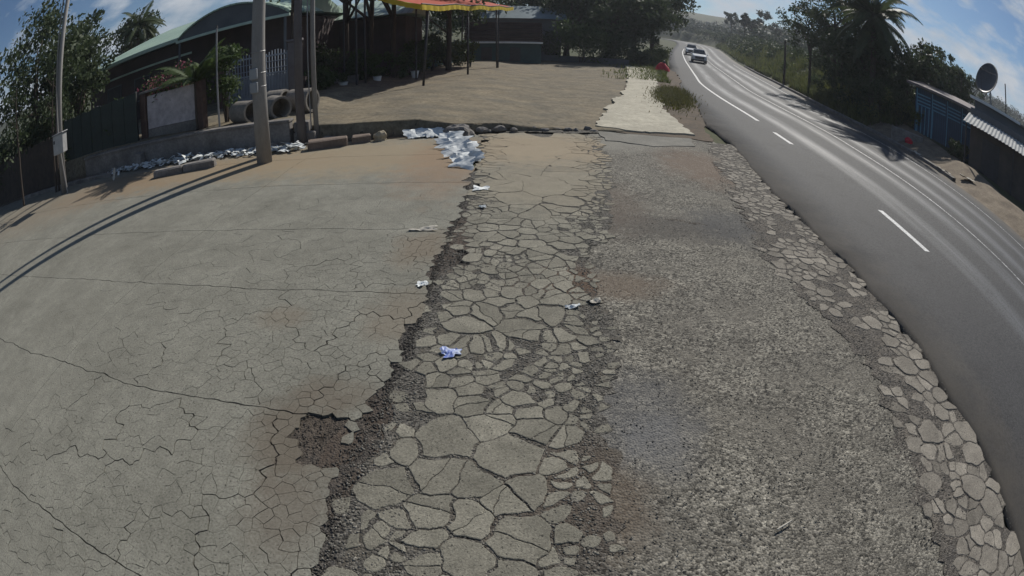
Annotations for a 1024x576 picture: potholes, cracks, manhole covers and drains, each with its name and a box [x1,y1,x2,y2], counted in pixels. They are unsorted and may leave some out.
crack [704,142,1024,576]
crack [2,403,312,576]
pothole [270,386,382,506]
crack [98,133,629,576]
